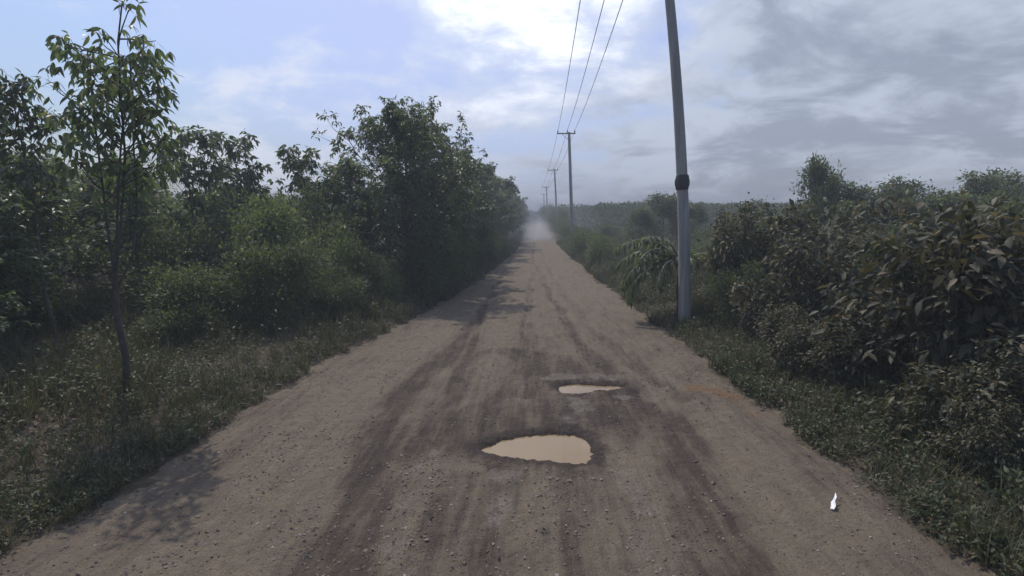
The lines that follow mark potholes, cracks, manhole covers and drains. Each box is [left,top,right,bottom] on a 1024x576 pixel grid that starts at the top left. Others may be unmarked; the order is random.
pothole [454,421,621,475]
pothole [538,376,644,399]
